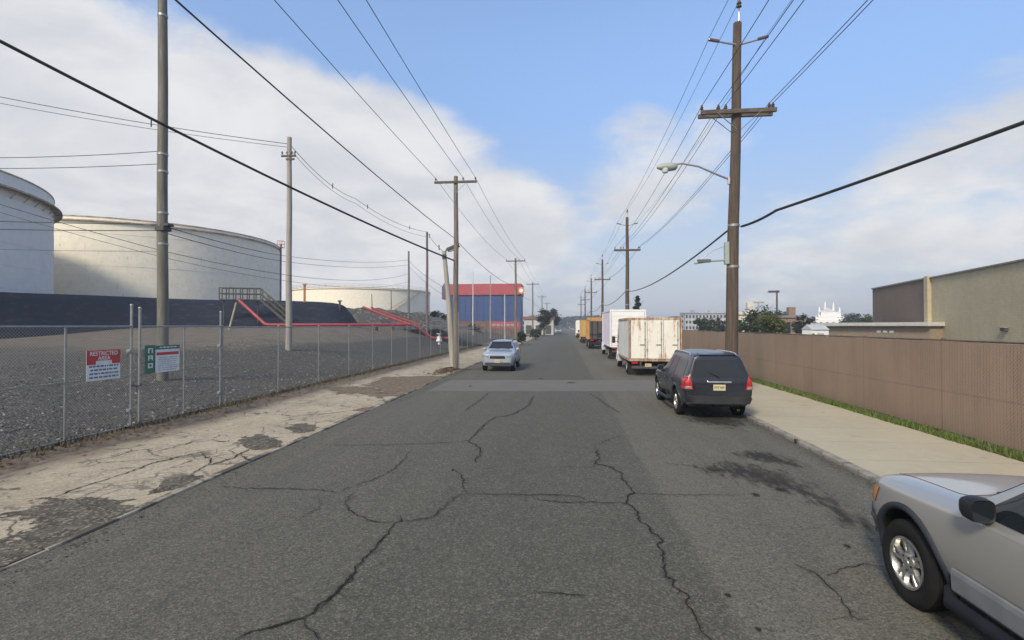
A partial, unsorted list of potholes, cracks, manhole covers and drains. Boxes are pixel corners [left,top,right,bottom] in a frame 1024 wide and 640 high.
crack [56,439,253,497]
crack [224,394,740,640]
crack [795,563,880,619]
